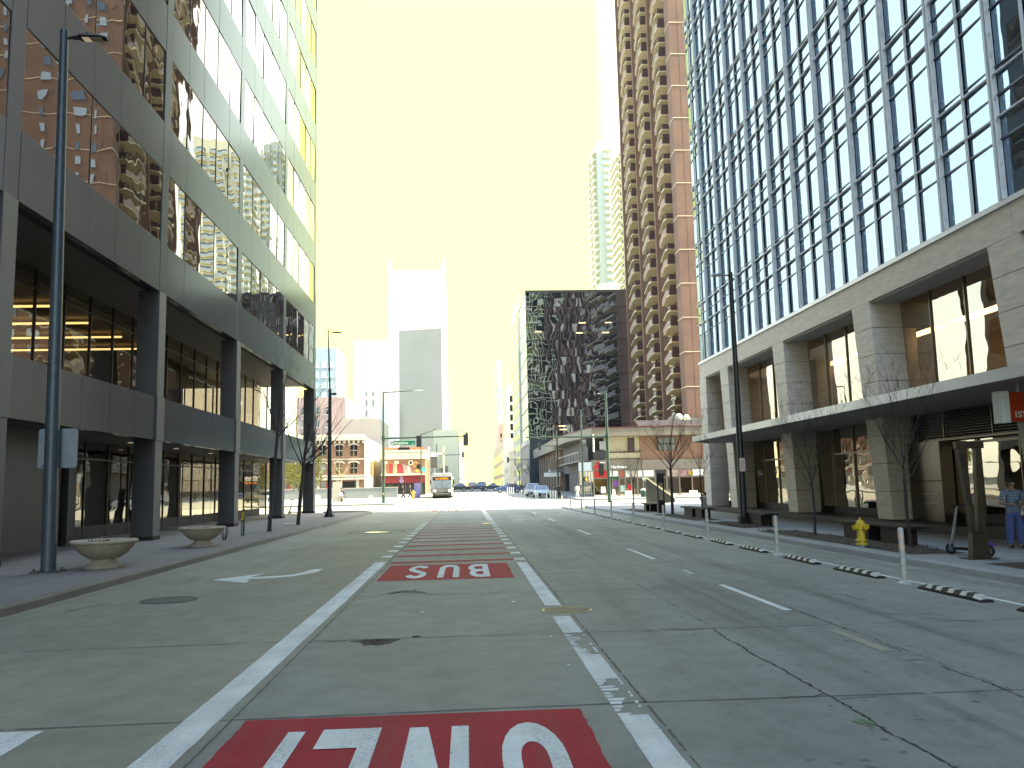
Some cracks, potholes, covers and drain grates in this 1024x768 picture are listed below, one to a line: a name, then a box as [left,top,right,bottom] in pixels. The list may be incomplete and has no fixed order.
crack [943,666,1023,697]
crack [713,629,958,768]
manhole cover [542,606,592,614]
manhole cover [139,596,198,604]
